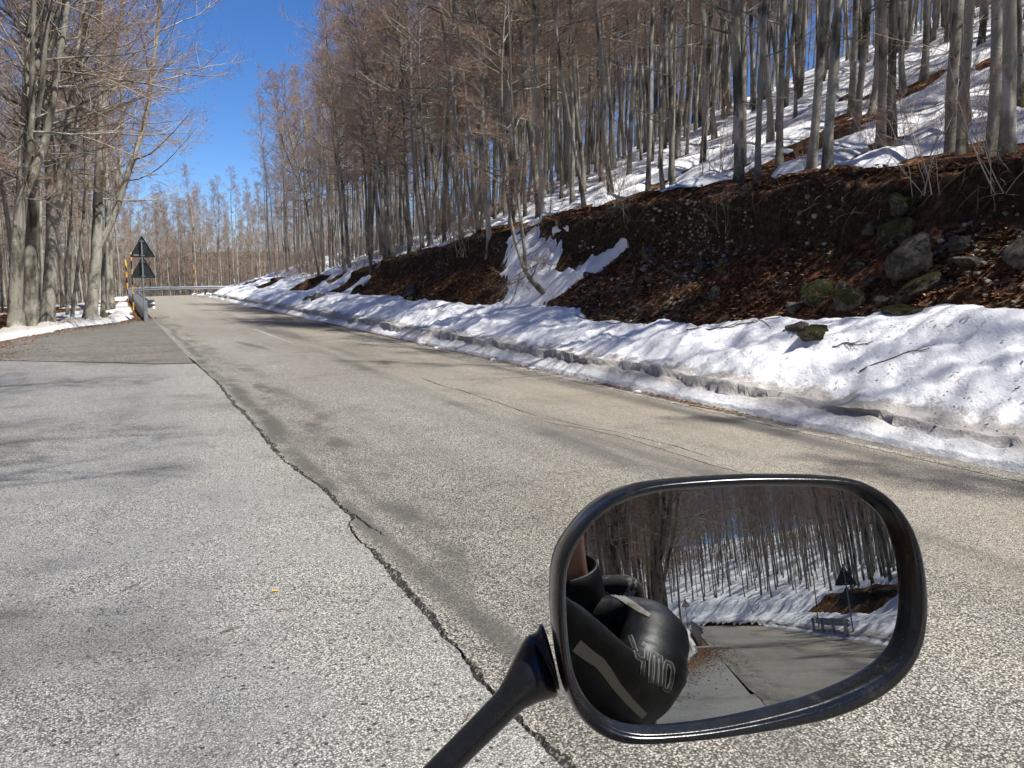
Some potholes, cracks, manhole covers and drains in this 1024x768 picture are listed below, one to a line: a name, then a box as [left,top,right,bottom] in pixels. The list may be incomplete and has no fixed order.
crack [0,360,577,768]
